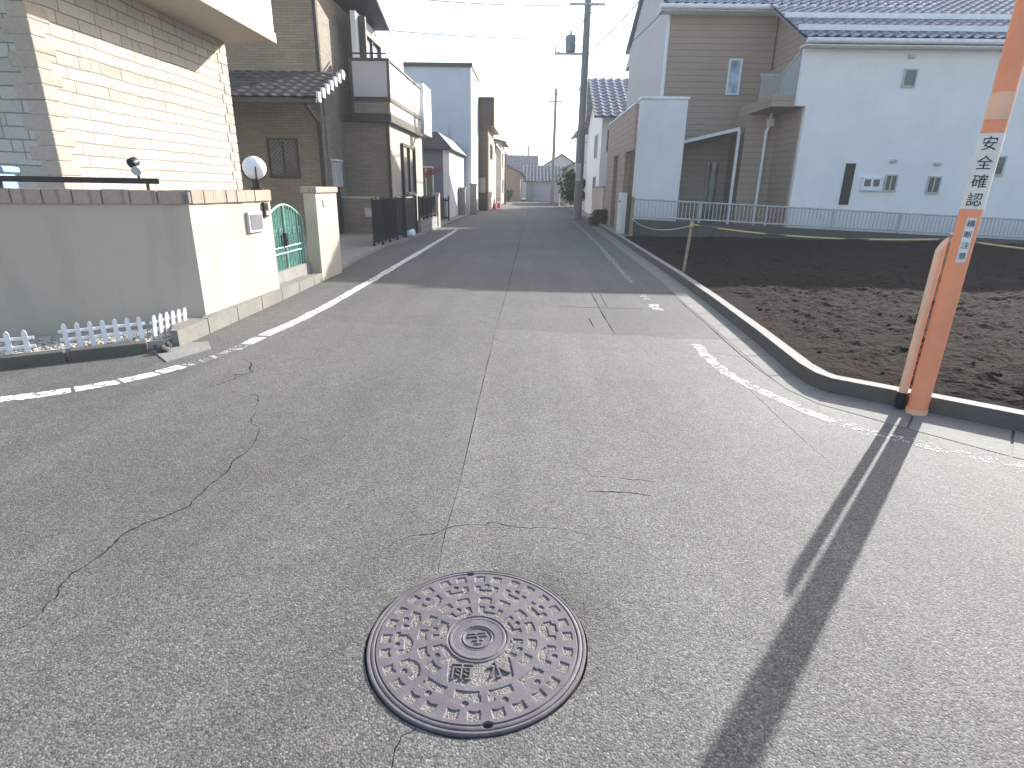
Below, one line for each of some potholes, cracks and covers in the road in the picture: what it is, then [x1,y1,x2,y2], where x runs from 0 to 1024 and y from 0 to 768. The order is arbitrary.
crack [567,293,633,333]
crack [595,476,653,496]
crack [390,522,587,547]
crack [0,395,270,637]
manhole cover [364,570,588,739]
